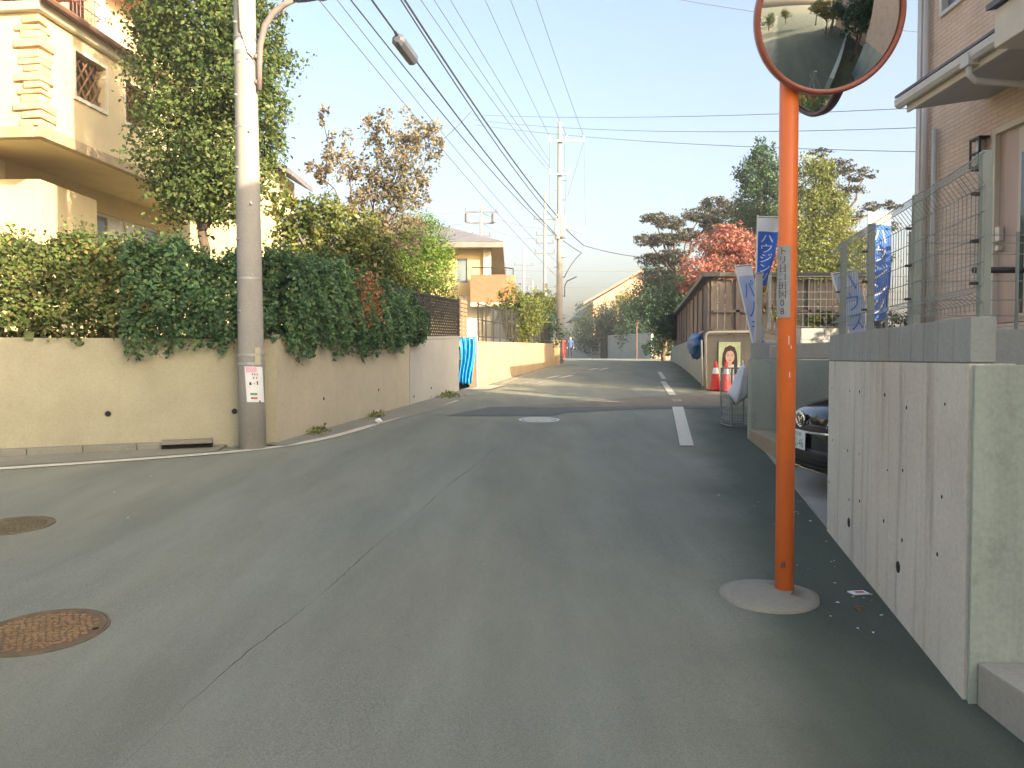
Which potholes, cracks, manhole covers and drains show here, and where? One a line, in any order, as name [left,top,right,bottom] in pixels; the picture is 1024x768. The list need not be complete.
manhole cover [0,516,56,536]
drain grate [161,438,213,449]
crack [122,446,499,765]
manhole cover [0,608,111,658]
